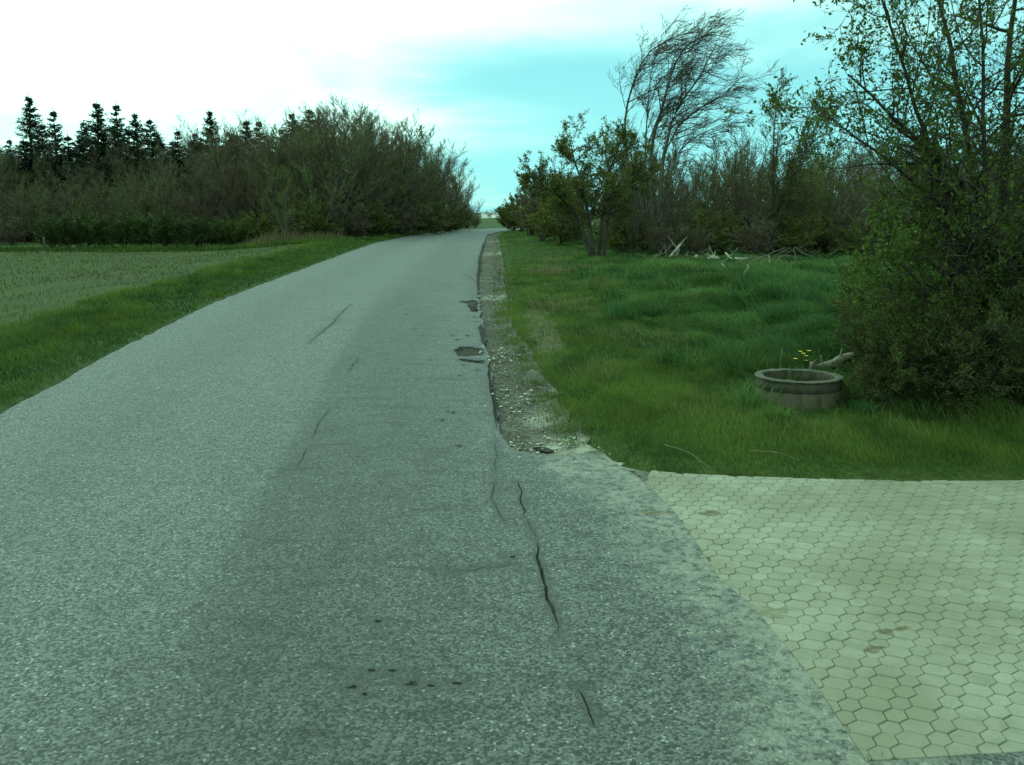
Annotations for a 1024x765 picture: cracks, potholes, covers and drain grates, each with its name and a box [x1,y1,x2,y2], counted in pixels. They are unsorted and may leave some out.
crack [487,366,505,522]
pothole [460,300,480,312]
crack [474,317,486,345]
pothole [454,347,484,356]
